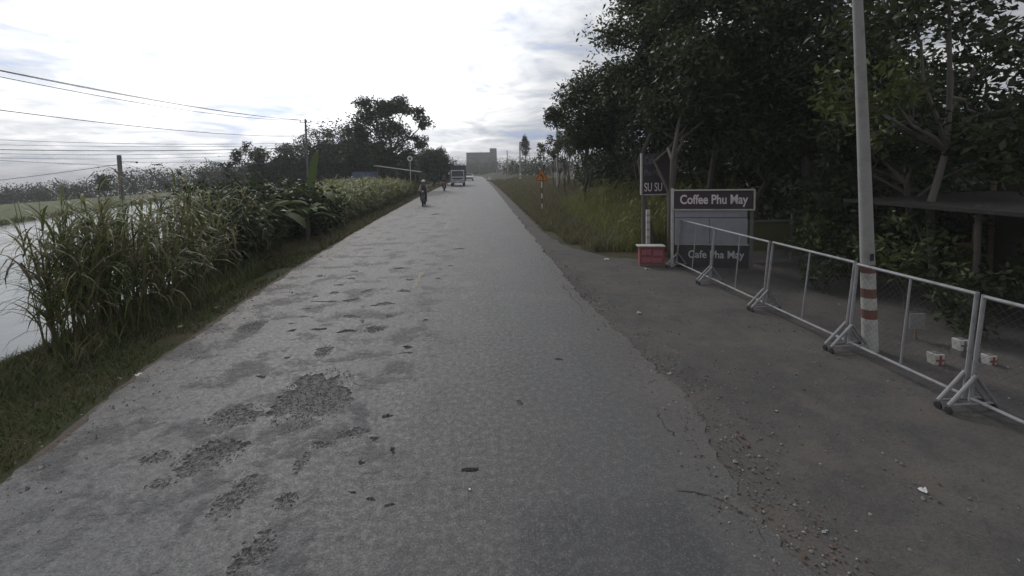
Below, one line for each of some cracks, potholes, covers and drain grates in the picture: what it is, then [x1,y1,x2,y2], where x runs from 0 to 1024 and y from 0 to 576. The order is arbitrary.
crack [679,491,767,542]
pothole [138,449,172,465]
pothole [205,473,259,520]
pothole [170,437,252,479]
pothole [236,320,268,333]
pothole [203,403,267,428]
pothole [225,526,277,576]
pothole [293,451,312,476]
pothole [265,368,355,431]
pothole [315,344,334,358]
pothole [272,490,300,510]
